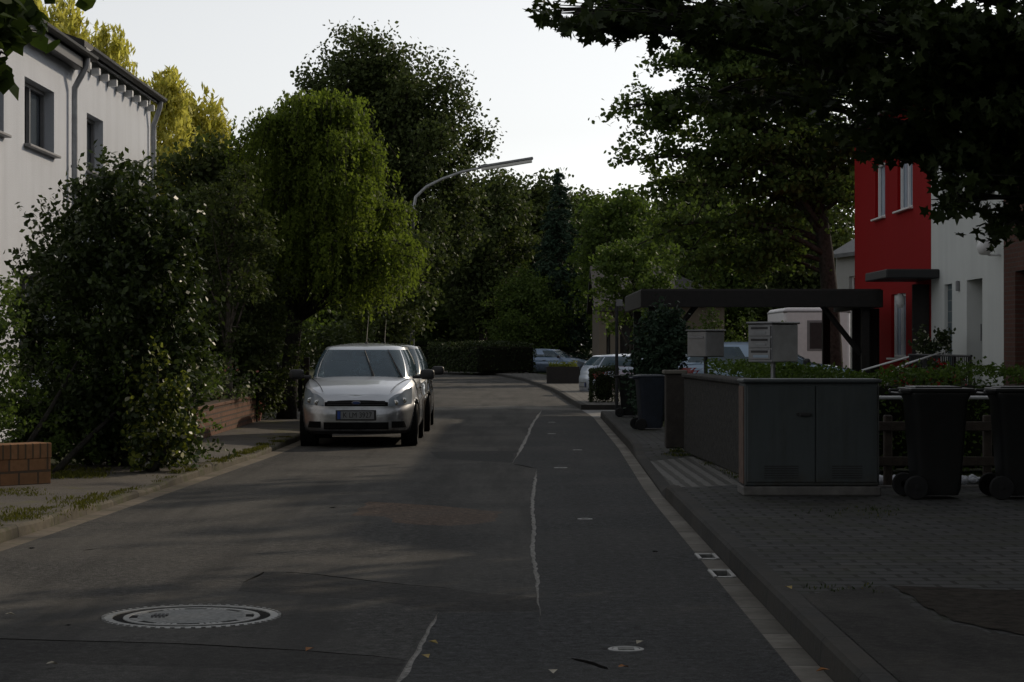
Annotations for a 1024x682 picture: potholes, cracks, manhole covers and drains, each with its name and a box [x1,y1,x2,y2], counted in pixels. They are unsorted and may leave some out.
manhole cover [101,604,281,629]
